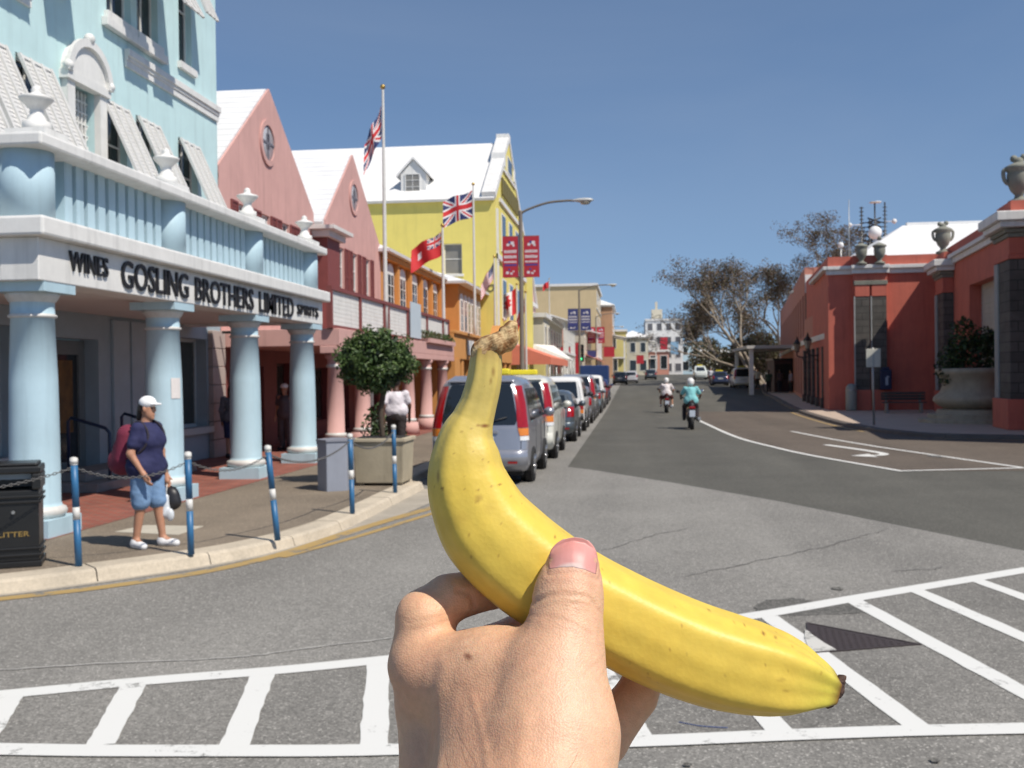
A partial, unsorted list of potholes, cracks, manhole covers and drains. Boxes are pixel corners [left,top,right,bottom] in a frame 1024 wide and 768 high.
crack [685,529,884,577]
